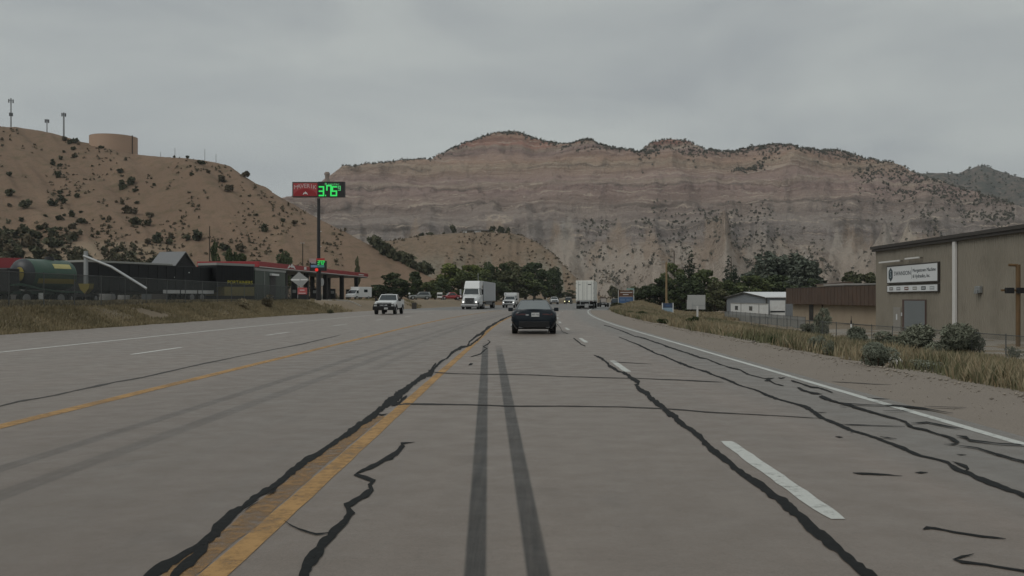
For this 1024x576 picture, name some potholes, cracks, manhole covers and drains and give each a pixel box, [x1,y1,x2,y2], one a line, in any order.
crack [397,325,1024,498]
